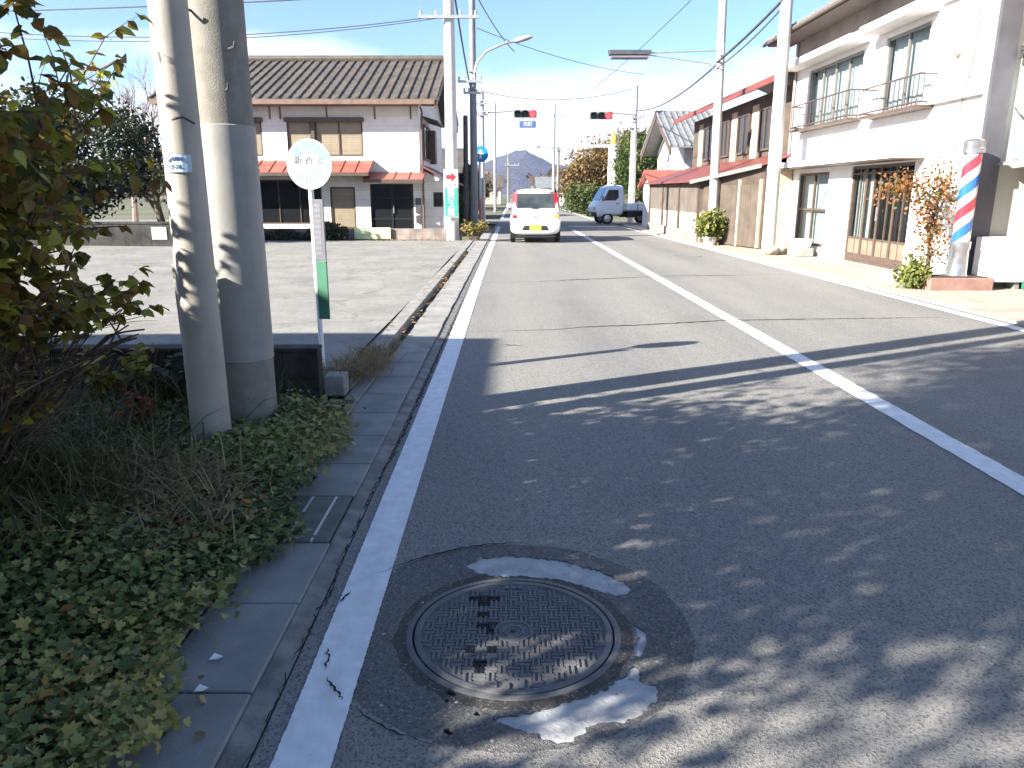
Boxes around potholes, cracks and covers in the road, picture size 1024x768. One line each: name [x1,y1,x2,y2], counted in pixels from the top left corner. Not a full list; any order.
manhole cover [406,578,621,701]
